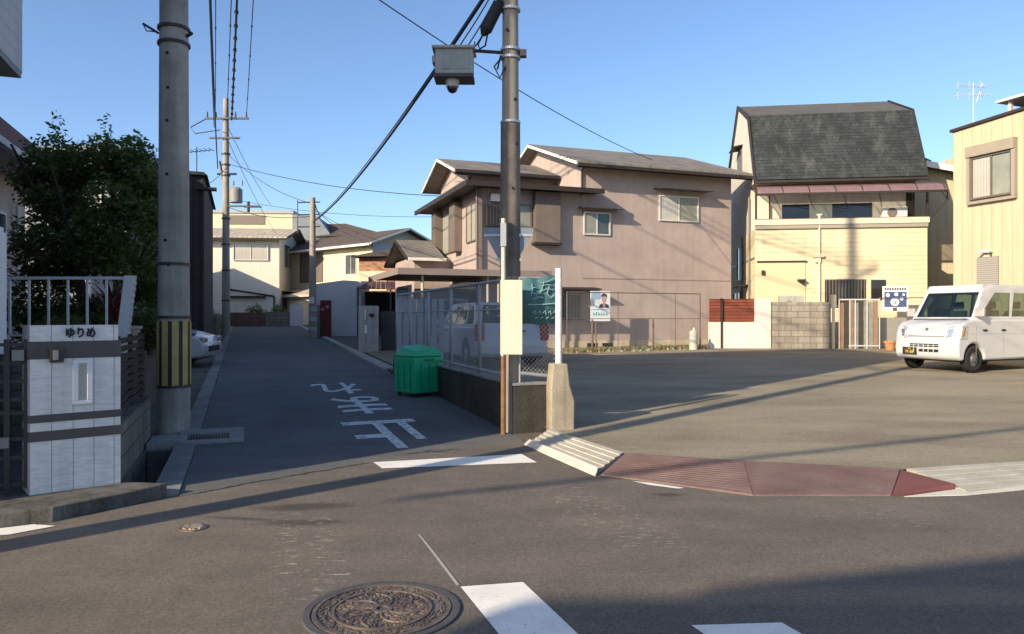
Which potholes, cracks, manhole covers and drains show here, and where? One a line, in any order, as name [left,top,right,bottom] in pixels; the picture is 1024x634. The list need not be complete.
manhole cover [301,581,461,634]
manhole cover [179,523,208,532]
drain grate [146,427,244,452]
